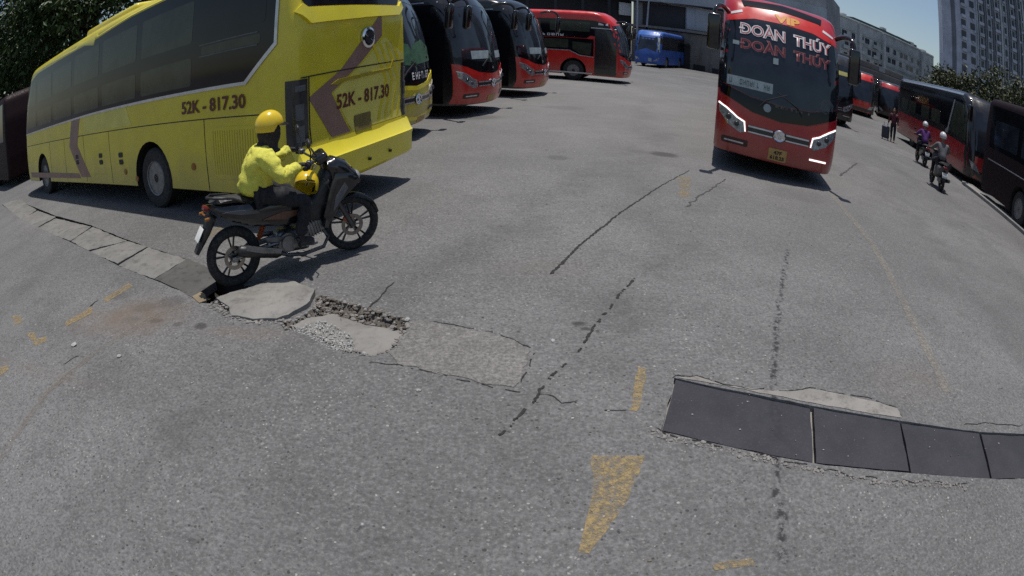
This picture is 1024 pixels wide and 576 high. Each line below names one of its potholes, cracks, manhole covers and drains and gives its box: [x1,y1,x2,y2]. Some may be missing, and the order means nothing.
crack [369,170,725,435]
pothole [280,294,413,357]
